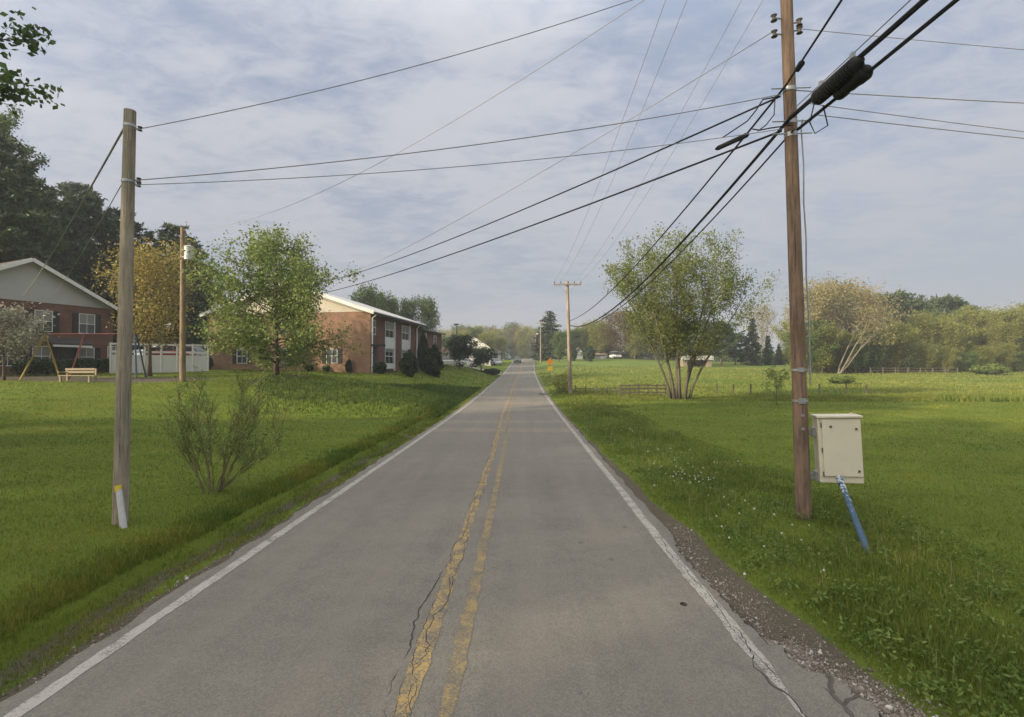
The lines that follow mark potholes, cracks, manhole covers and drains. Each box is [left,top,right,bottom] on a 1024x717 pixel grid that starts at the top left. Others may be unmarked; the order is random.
crack [825,673,860,717]
crack [661,539,808,717]
